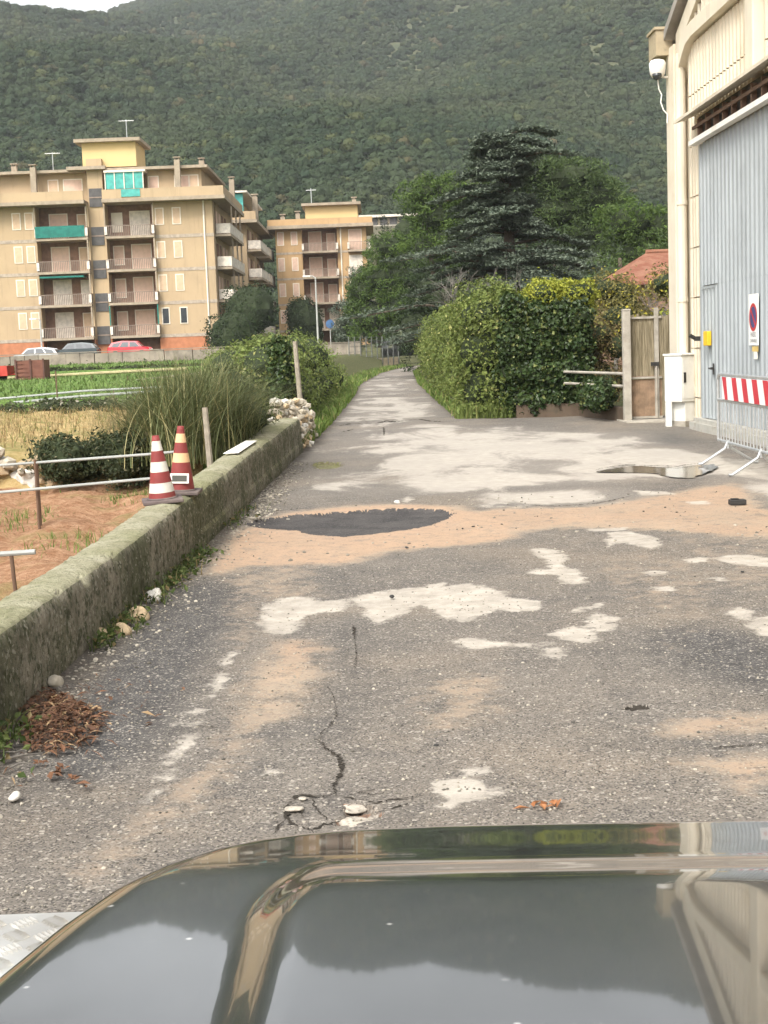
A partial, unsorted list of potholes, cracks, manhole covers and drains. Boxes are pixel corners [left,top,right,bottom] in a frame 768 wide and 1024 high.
crack [273,687,423,834]
